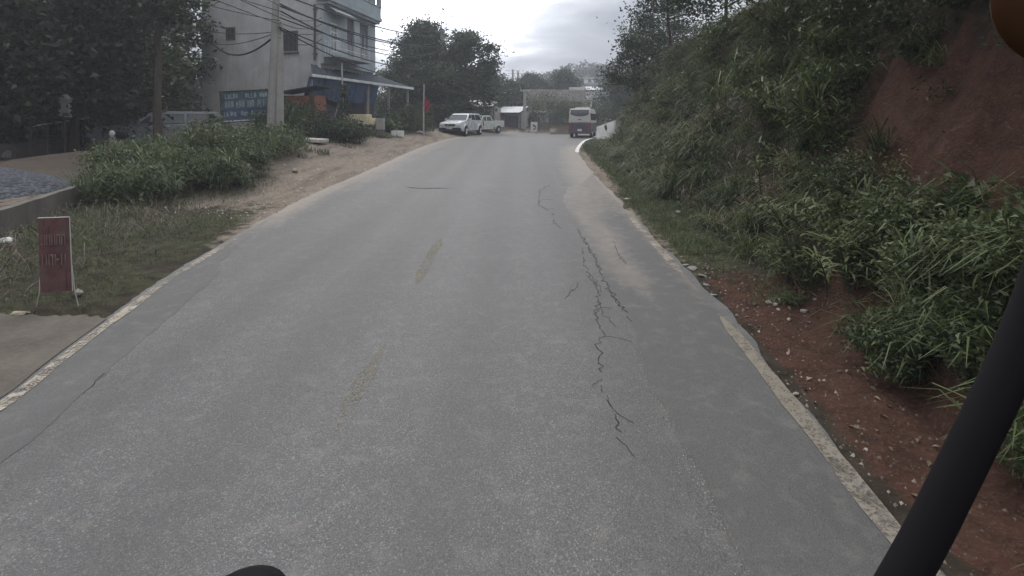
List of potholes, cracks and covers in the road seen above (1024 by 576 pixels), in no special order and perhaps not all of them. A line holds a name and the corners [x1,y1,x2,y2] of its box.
crack [569,248,634,456]
